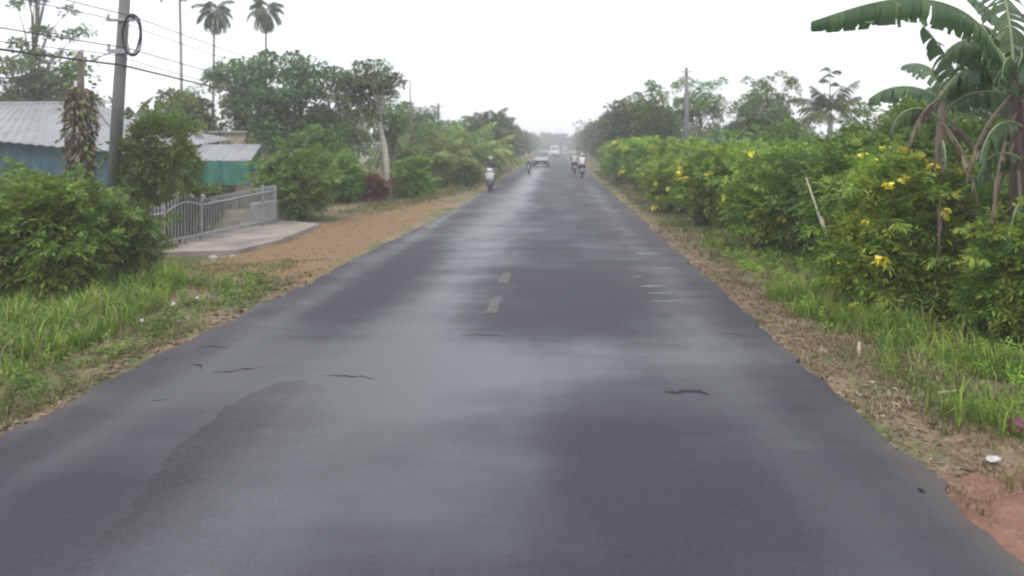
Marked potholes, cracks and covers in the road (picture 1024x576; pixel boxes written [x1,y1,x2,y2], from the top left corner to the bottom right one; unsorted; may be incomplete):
crack [193,346,261,373]
